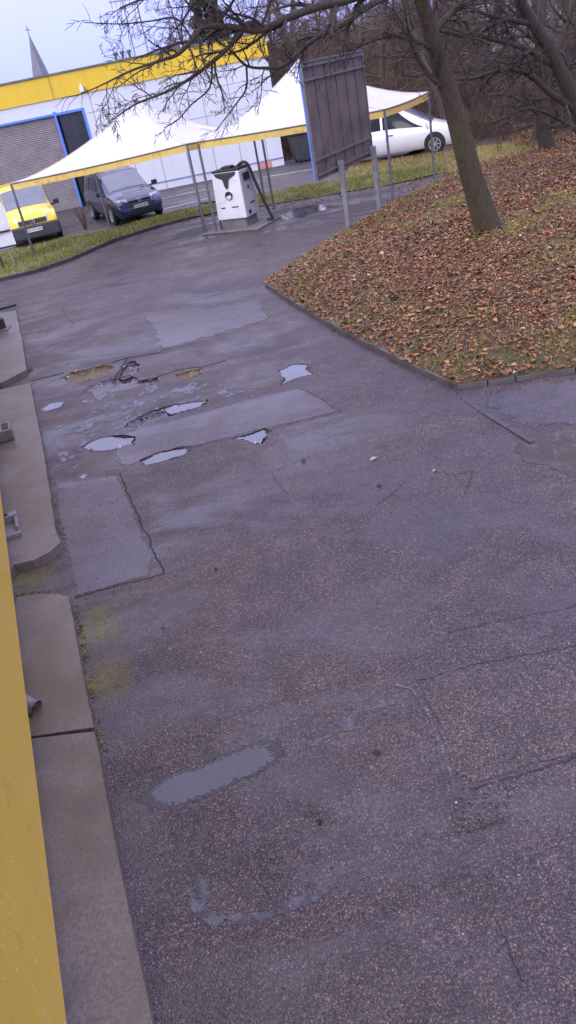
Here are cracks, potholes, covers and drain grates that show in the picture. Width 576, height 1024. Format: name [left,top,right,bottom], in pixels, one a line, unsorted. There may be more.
pothole [125,398,209,429]
pothole [228,428,272,445]
pothole [60,363,114,383]
crack [75,454,258,598]
pothole [117,359,140,382]
pothole [139,446,191,465]
pothole [81,435,138,452]
crack [388,601,576,776]
pothole [176,367,203,379]
